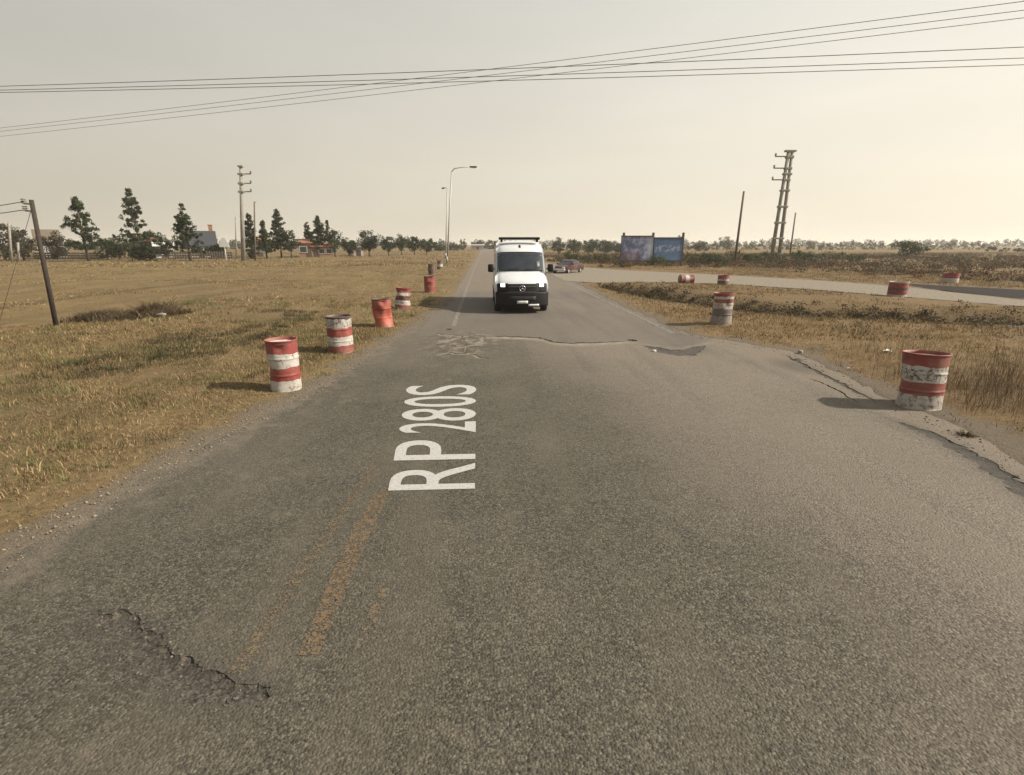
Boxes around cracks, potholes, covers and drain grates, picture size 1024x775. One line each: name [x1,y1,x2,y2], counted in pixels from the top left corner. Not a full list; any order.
pothole [642,345,706,356]
crack [899,422,1024,500]
crack [436,333,623,359]
crack [788,356,873,403]
